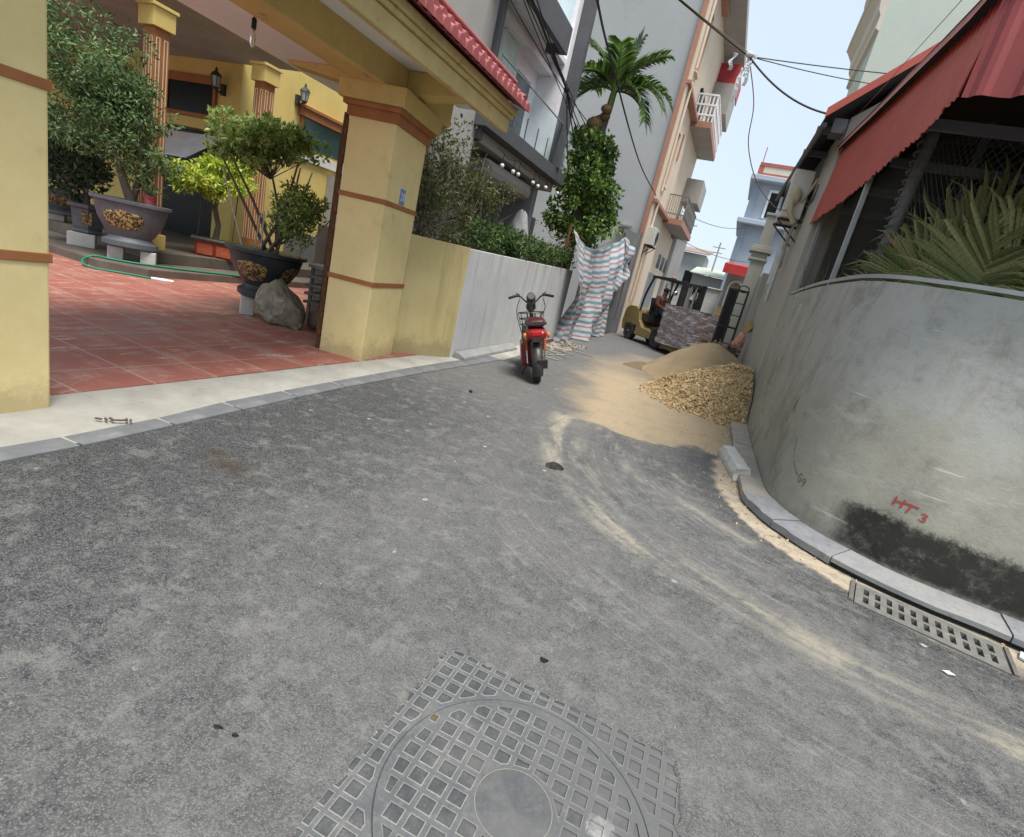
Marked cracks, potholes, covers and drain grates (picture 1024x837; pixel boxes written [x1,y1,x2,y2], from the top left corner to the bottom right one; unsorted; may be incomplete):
drain grate [848,579,1020,678]
manhole cover [294,647,680,837]
